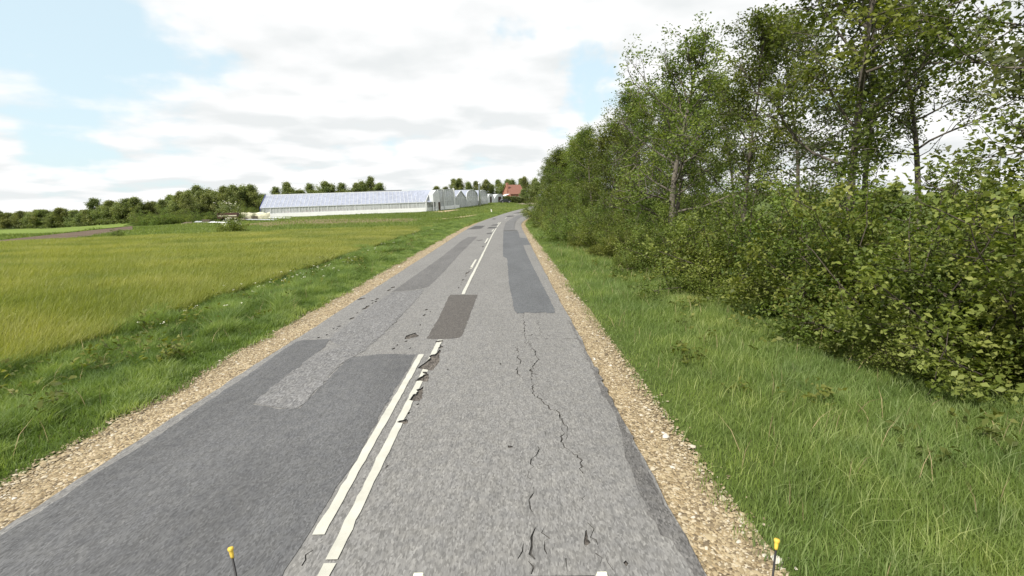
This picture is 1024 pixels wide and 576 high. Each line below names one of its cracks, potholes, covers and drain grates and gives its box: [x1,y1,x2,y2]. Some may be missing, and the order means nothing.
crack [518,528,550,574]
crack [515,313,584,511]
pothole [418,350,441,370]
pothole [410,387,423,401]
